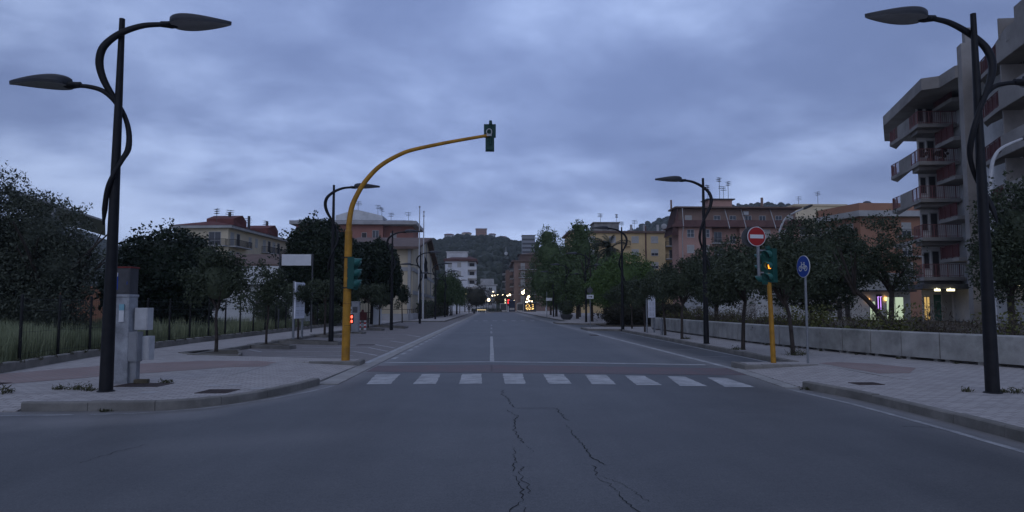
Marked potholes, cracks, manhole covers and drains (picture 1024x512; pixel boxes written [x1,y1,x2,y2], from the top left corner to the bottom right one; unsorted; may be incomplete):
crack [557,408,649,512]
crack [501,390,534,512]
